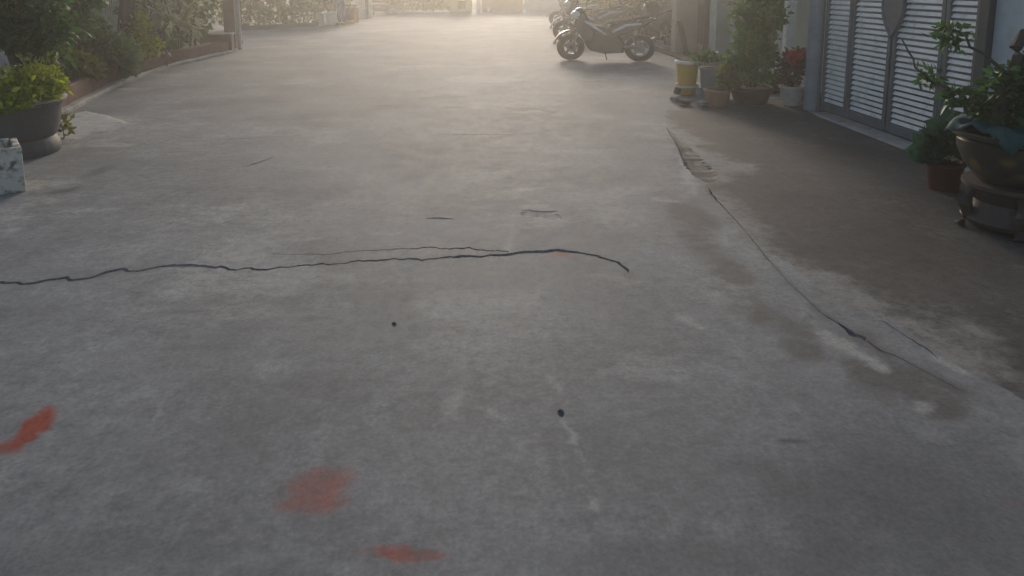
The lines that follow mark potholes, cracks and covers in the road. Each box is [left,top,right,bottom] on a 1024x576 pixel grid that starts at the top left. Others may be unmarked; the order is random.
crack [0,247,629,285]
pothole [520,209,563,221]
crack [879,320,938,359]
pothole [666,127,719,184]
